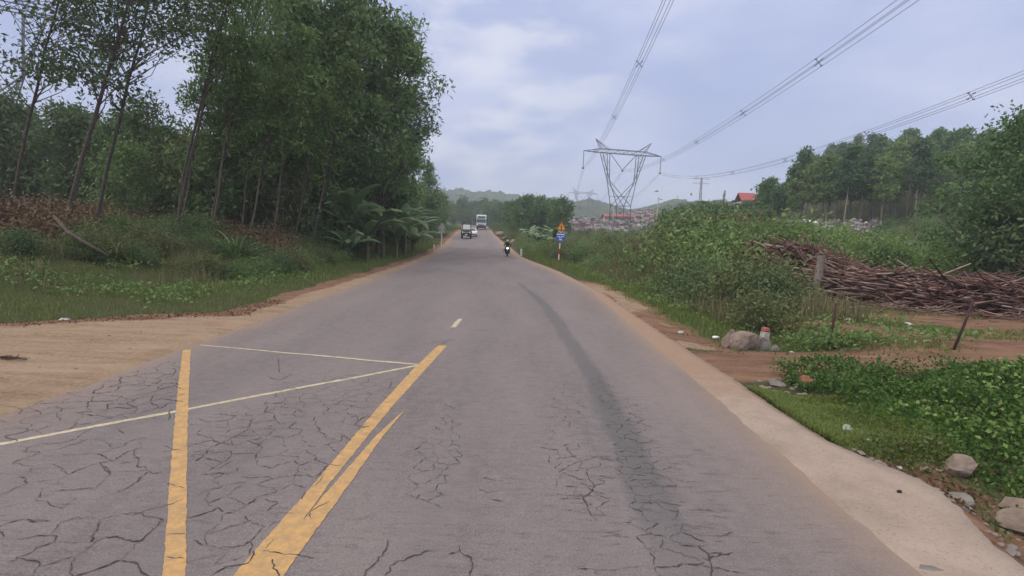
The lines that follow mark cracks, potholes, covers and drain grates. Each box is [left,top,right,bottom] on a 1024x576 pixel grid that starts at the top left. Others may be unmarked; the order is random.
crack [406,399,468,507]
crack [0,361,371,576]
crack [364,541,432,576]
crack [543,378,743,576]
